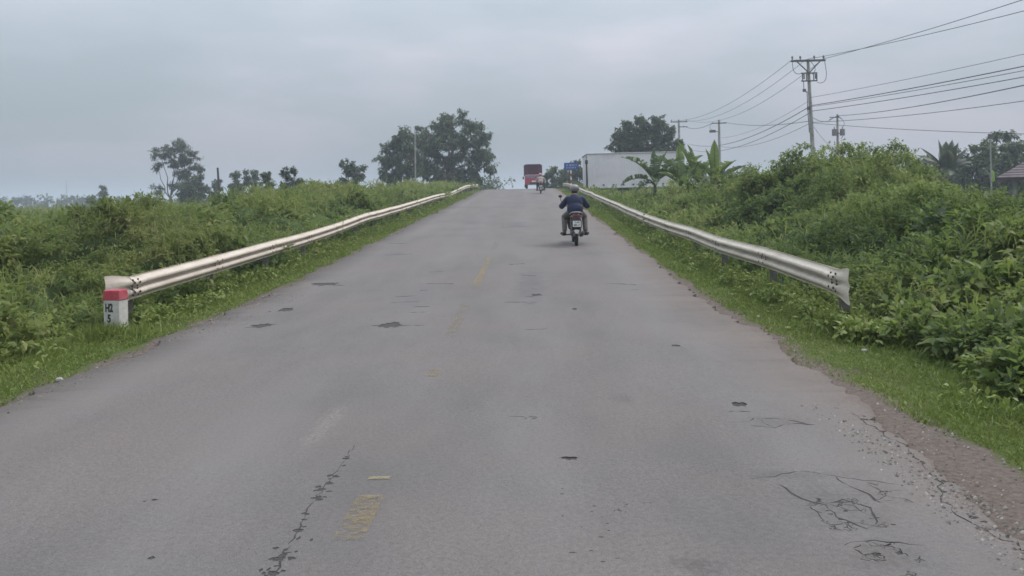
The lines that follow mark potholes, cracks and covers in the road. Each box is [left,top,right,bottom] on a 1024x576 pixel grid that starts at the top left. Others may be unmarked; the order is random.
crack [748,471,925,576]
crack [259,445,355,576]
crack [744,418,813,428]
crack [852,413,1024,551]
